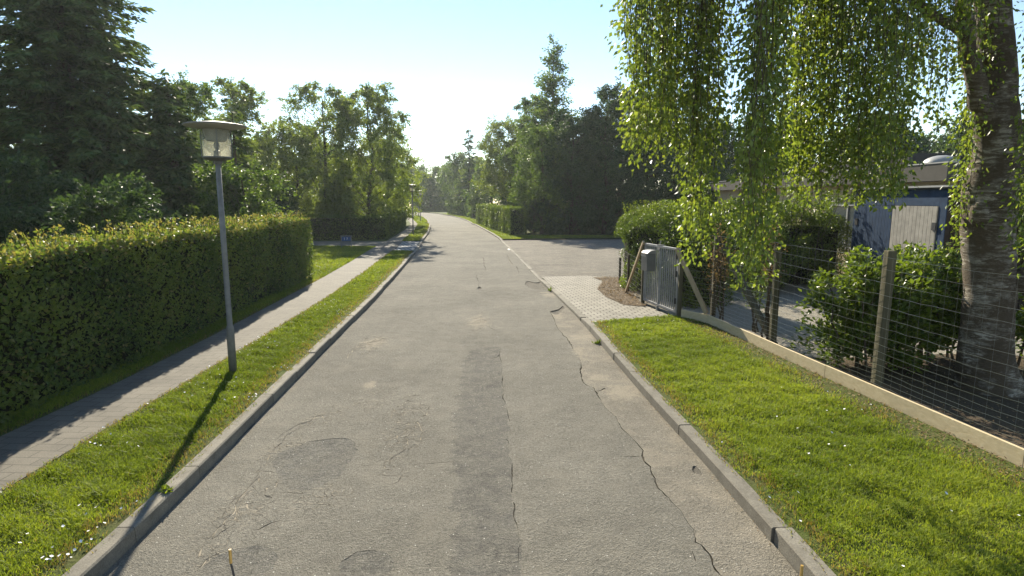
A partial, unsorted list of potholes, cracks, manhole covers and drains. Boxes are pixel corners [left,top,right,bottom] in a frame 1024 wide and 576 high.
crack [494,347,520,559]
crack [362,395,441,485]
crack [198,408,348,569]
crack [550,312,721,576]
